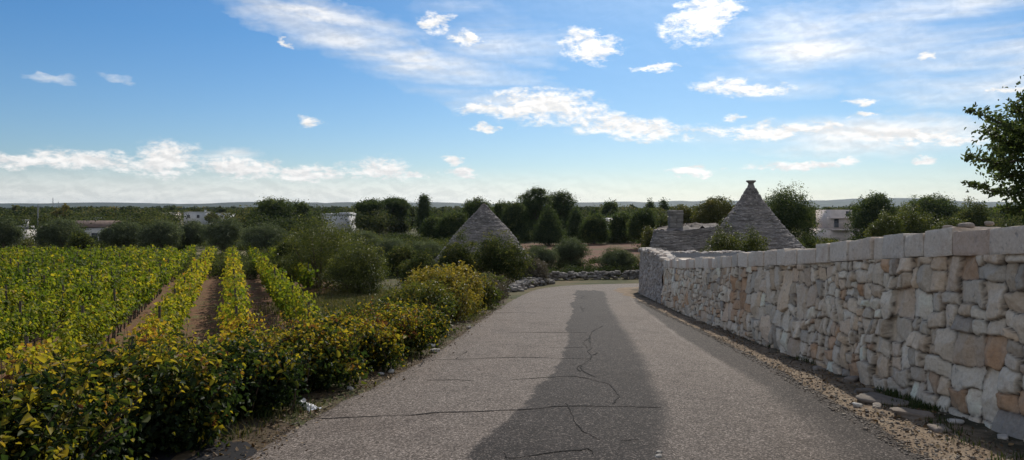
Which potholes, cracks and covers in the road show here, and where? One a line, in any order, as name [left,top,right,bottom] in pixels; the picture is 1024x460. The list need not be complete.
crack [306,326,661,458]
